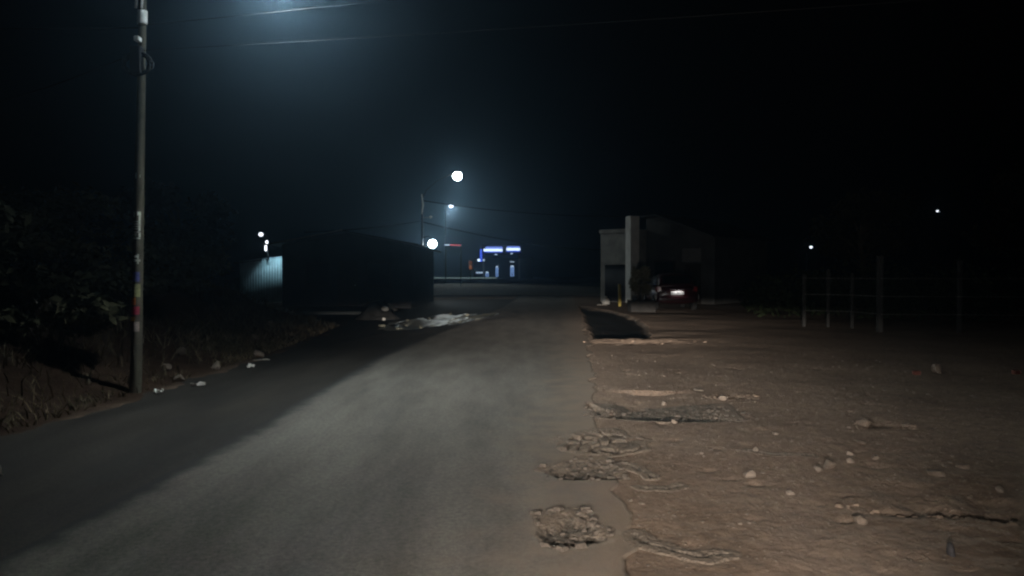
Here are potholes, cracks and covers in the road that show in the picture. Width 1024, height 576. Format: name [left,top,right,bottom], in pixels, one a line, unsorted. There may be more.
pothole [534,457,630,481]
crack [621,529,742,565]
crack [546,427,690,492]
pothole [529,505,616,552]
pothole [582,403,759,425]
